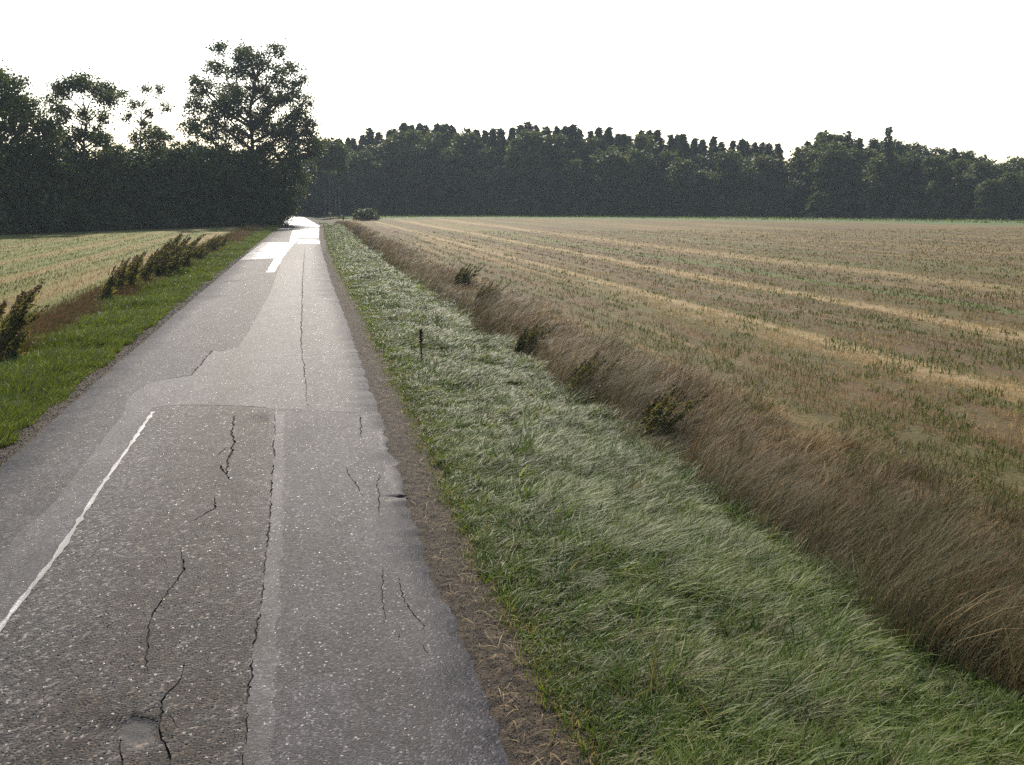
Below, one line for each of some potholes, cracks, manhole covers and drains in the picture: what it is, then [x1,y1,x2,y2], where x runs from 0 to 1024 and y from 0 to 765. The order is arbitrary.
crack [140,547,186,765]
pothole [121,717,156,743]
crack [300,257,369,437]
crack [347,469,381,511]
crack [381,569,429,654]
crack [160,405,276,765]
